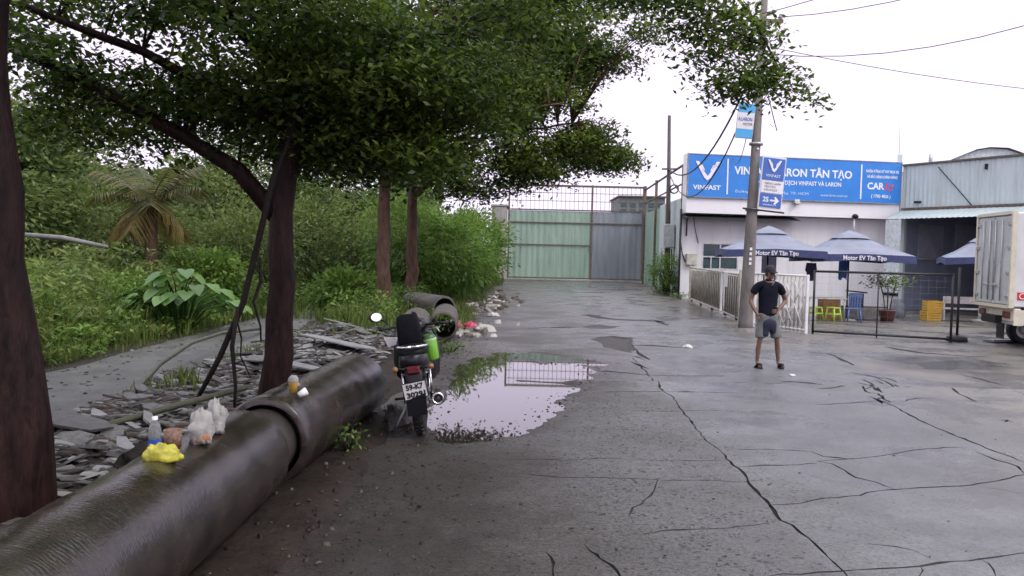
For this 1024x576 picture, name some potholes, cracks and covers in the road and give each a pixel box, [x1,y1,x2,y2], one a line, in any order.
crack [586,547,634,576]
crack [601,345,727,393]
crack [521,458,767,534]
crack [547,553,555,576]
